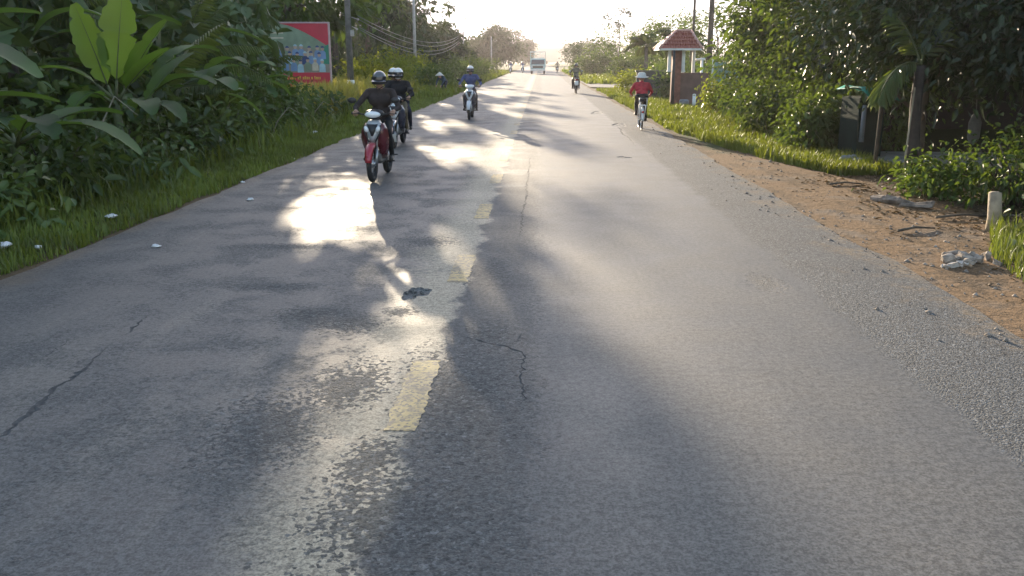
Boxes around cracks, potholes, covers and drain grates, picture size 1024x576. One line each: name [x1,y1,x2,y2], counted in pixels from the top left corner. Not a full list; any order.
pothole [401,287,432,300]
crack [463,333,527,411]
crack [0,317,147,437]
